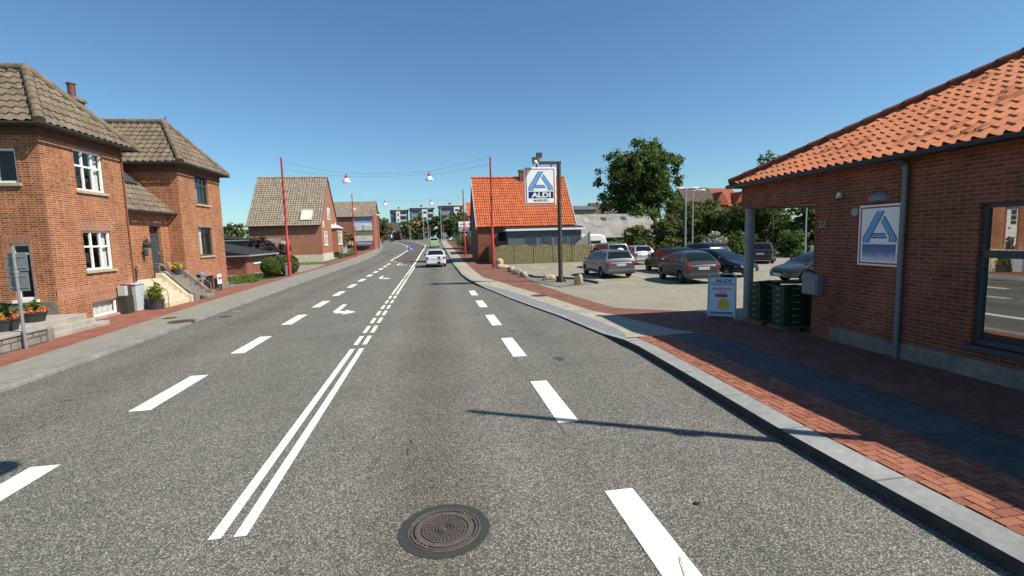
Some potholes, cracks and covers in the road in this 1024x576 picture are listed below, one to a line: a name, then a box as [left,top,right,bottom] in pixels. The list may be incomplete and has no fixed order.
manhole cover [397,504,490,559]
